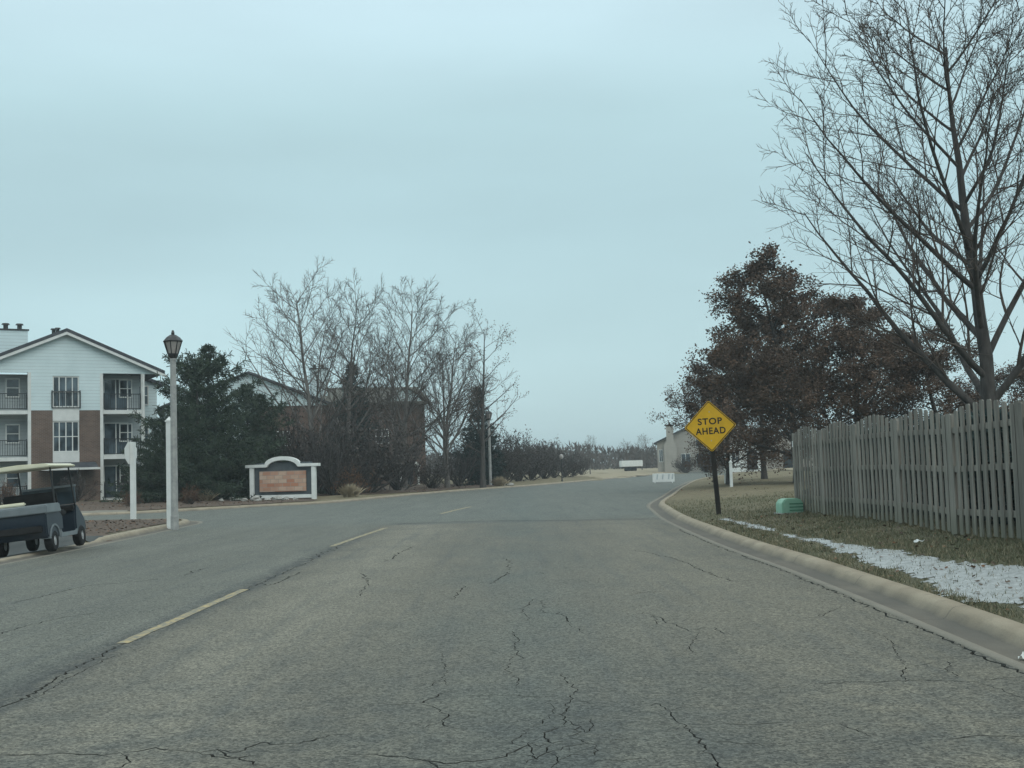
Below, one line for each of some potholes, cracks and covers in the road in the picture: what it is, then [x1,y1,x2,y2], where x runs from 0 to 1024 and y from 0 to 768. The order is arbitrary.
crack [652,703,789,768]
crack [635,529,1024,698]
crack [7,733,352,768]
crack [352,599,649,768]
